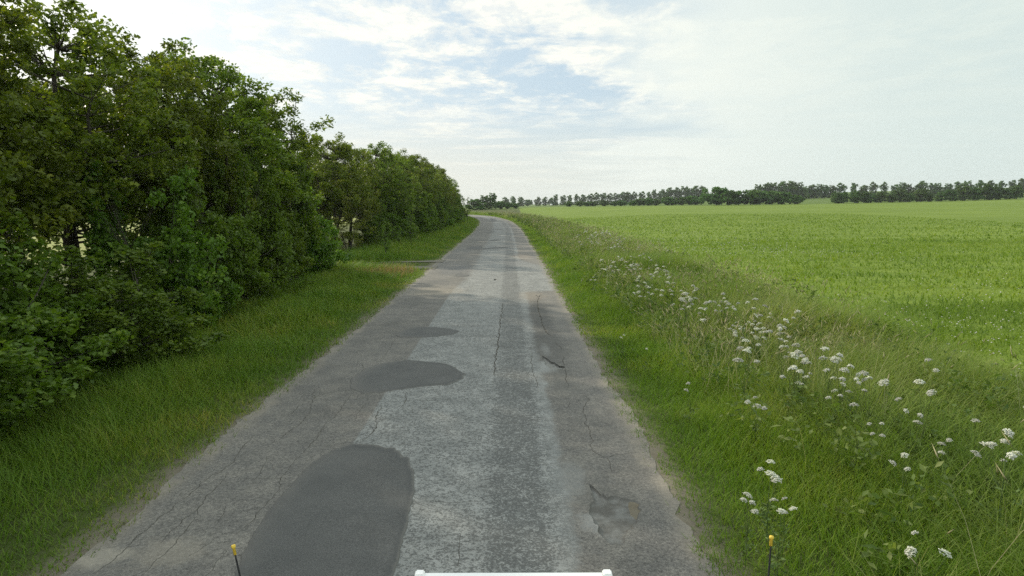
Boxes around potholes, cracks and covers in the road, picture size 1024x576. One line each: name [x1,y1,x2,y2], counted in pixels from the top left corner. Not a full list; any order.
pothole [588,483,642,546]
crack [95,349,382,576]
crack [536,295,633,471]
